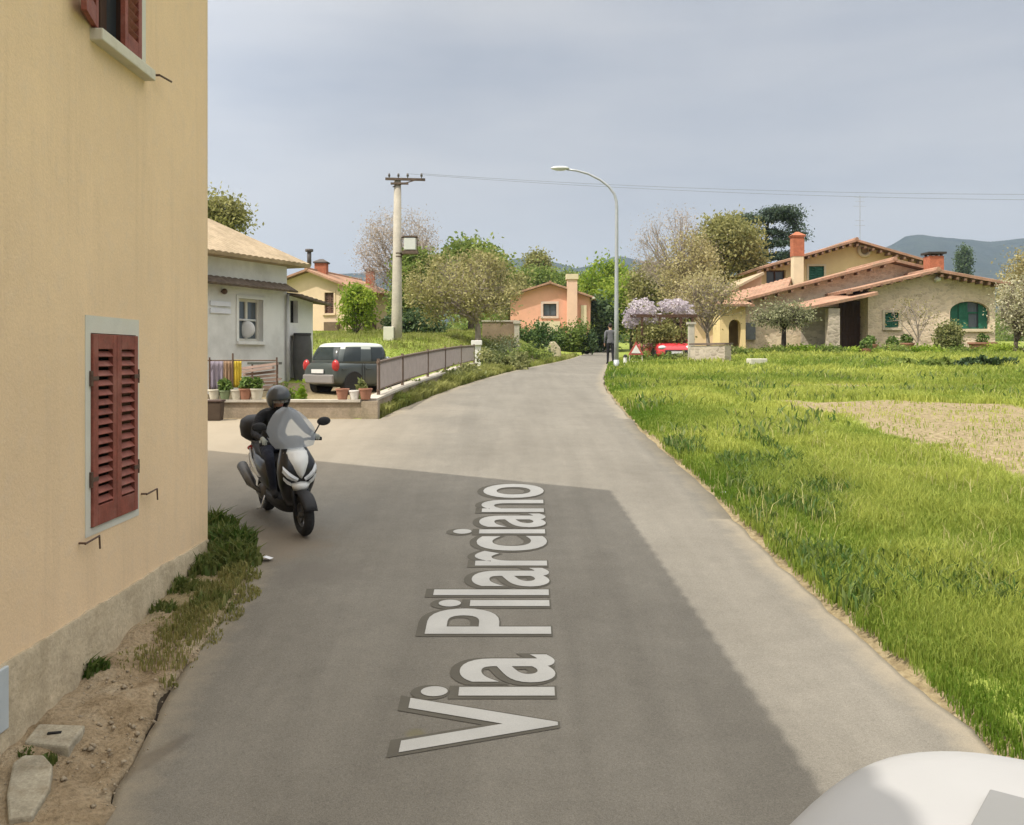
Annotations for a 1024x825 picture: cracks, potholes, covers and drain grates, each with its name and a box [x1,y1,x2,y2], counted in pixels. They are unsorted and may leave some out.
manhole cover [25,724,85,757]
